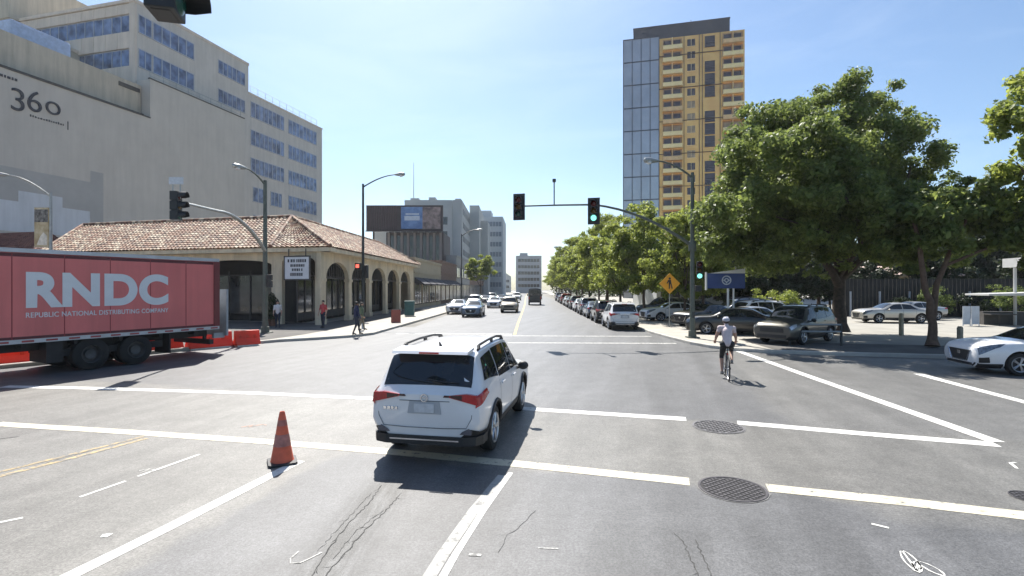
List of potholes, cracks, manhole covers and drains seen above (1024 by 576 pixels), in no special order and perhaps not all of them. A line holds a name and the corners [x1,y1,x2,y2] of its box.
manhole cover [1007,490,1024,500]
manhole cover [696,476,771,503]
manhole cover [691,420,746,434]
crack [312,486,400,576]
crack [674,533,712,576]
